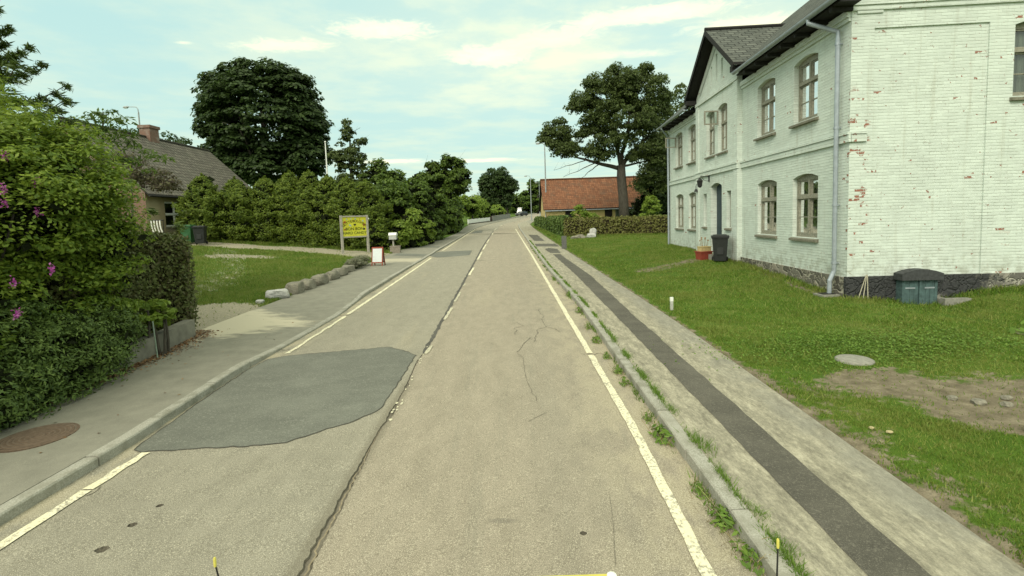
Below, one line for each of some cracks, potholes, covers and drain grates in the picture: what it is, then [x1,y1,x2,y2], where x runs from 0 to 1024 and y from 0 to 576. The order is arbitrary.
crack [514,310,558,422]
manhole cover [834,354,875,366]
manhole cover [0,423,80,453]
